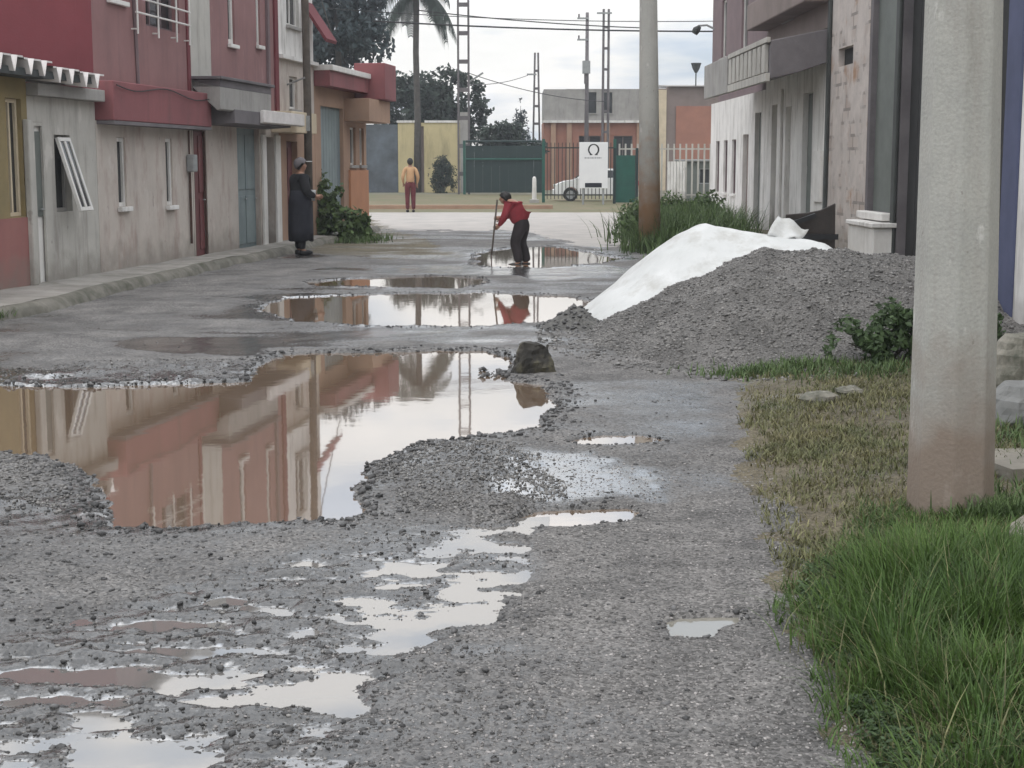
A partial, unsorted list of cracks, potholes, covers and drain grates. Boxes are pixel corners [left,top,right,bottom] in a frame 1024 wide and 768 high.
pothole [0,347,577,530]
pothole [251,291,592,327]
pothole [562,430,677,446]
pothole [649,610,756,641]
pothole [465,246,628,268]
pothole [501,502,650,530]
